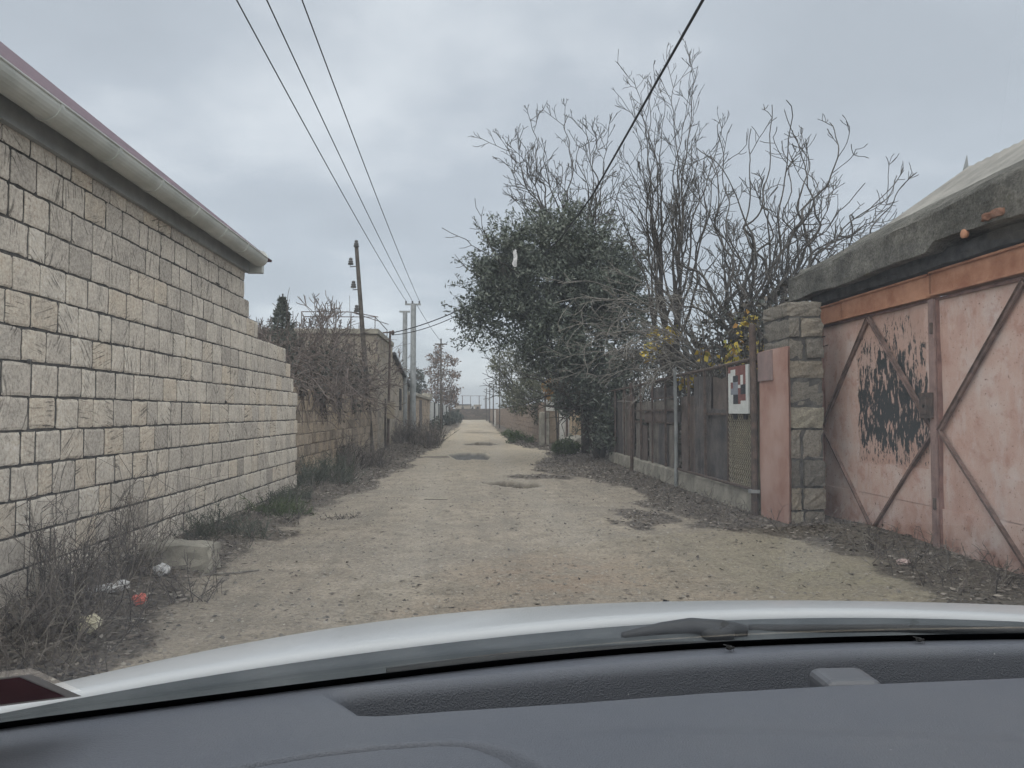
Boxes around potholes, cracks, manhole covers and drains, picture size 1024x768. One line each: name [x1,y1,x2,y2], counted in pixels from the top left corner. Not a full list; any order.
pothole [447,452,492,461]
pothole [480,480,545,489]
